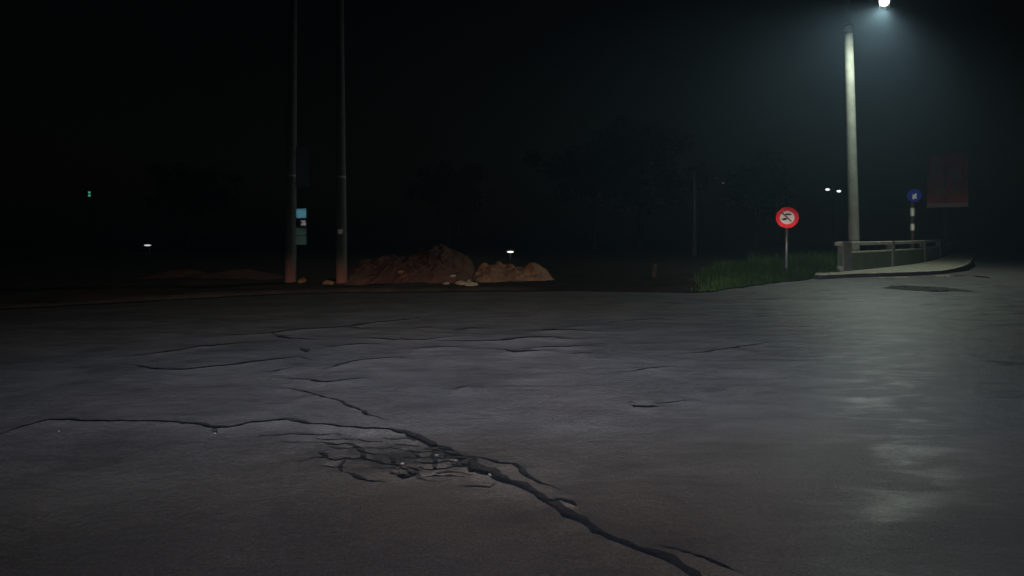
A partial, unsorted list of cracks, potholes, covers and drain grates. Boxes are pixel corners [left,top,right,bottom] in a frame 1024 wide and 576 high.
crack [681,343,763,354]
crack [3,317,739,576]
